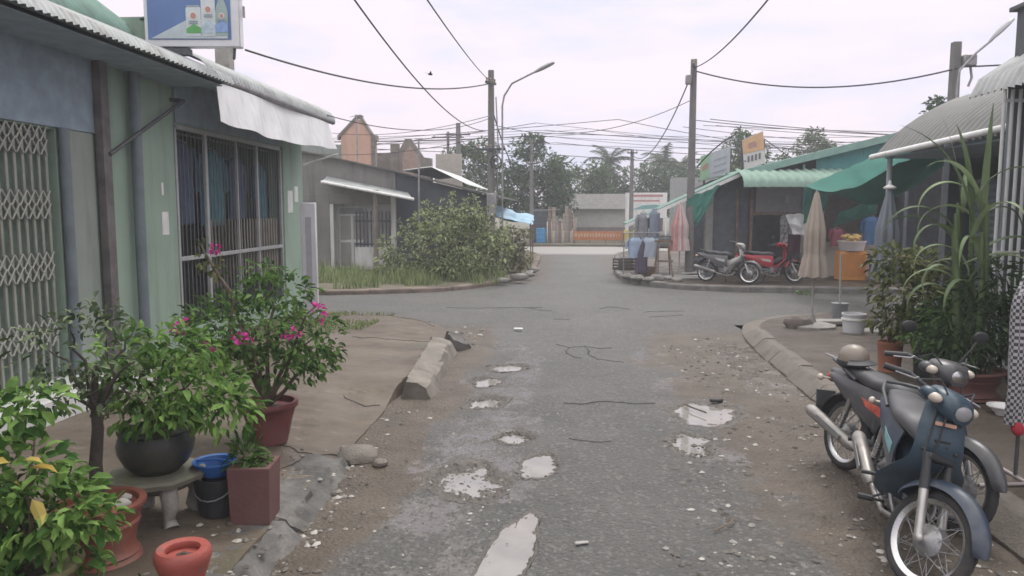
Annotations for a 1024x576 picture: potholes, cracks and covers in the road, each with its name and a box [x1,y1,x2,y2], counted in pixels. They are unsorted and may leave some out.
pothole [492,429,538,446]
pothole [460,393,513,410]
pothole [467,375,503,389]
pothole [483,363,533,373]
pothole [515,450,564,480]
pothole [421,458,516,506]
pothole [662,399,751,429]
pothole [471,508,542,576]
pothole [659,430,716,460]
crack [557,344,619,362]
